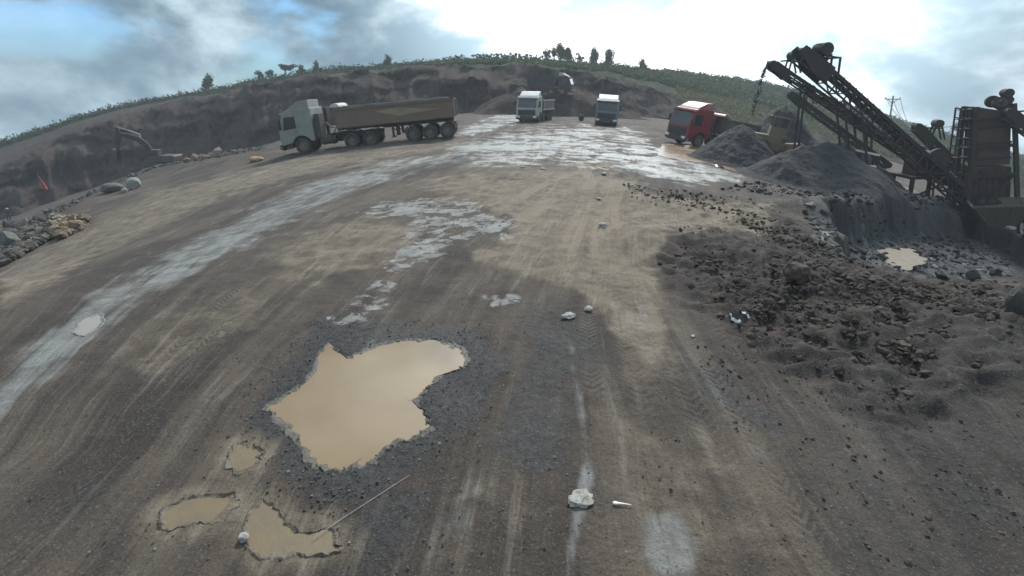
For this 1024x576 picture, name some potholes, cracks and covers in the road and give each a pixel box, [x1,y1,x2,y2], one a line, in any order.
pothole [223,440,267,477]
pothole [242,498,344,561]
pothole [260,338,471,474]
pothole [71,313,106,337]
pothole [156,491,241,532]
